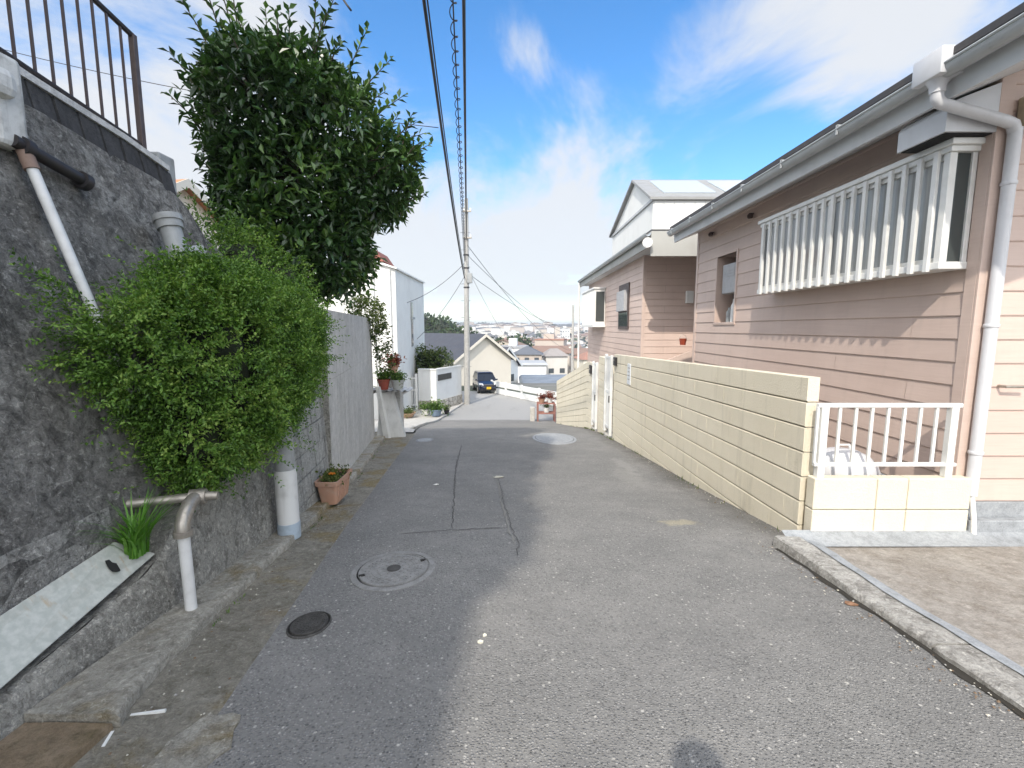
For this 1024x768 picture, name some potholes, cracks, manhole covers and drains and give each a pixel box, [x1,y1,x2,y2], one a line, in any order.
manhole cover [286,611,332,639]
manhole cover [350,551,435,592]
manhole cover [533,433,577,445]
crack [403,446,519,555]
